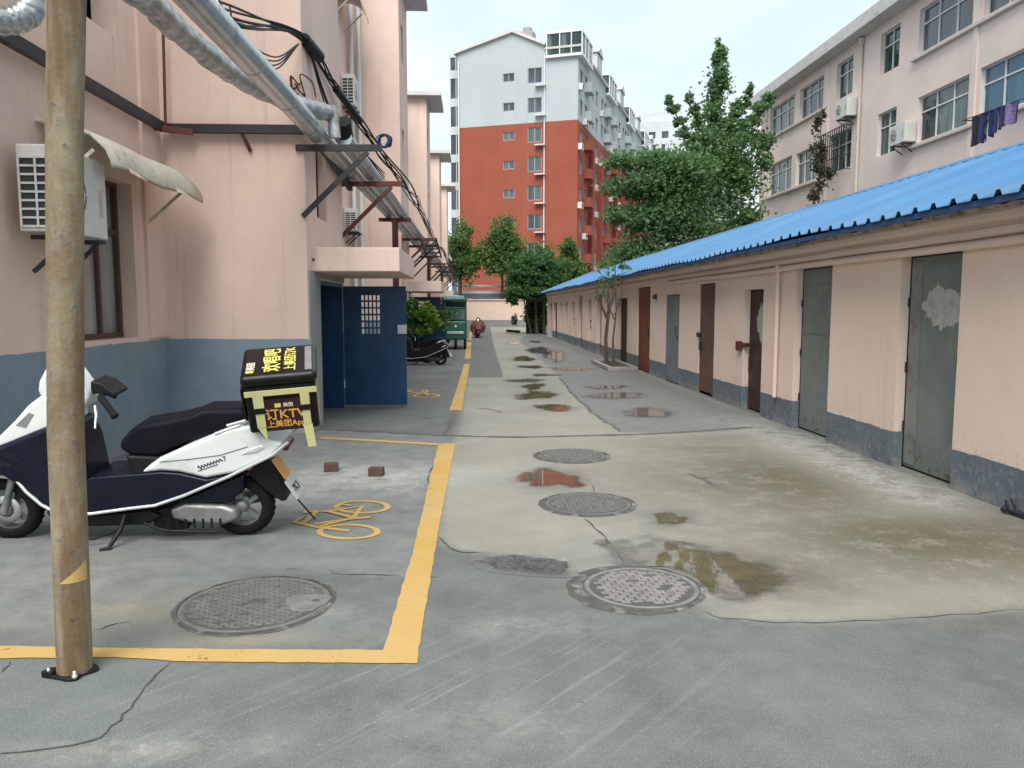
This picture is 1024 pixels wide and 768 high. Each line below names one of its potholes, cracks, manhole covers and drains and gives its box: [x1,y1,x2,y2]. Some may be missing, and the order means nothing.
manhole cover [538,492,637,517]
manhole cover [170,576,336,637]
manhole cover [533,449,611,464]
crack [689,473,718,486]
manhole cover [566,565,706,615]
crack [0,661,171,754]
